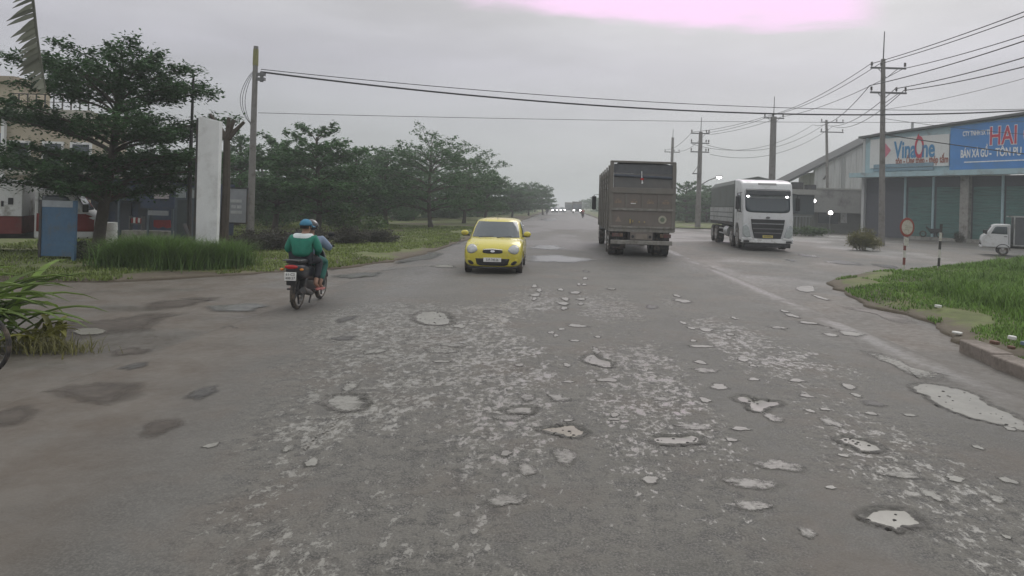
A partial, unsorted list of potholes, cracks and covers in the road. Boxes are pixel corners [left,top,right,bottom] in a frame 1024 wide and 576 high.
pothole [833,436,888,453]
pothole [647,432,707,446]
crack [304,413,350,450]
pothole [731,394,784,413]
pothole [909,382,1024,431]
pothole [411,311,455,326]
pothole [856,506,930,533]
pothole [722,477,775,489]
pothole [580,353,615,368]
pothole [320,393,371,413]
pothole [755,459,801,471]
pothole [501,405,538,415]
